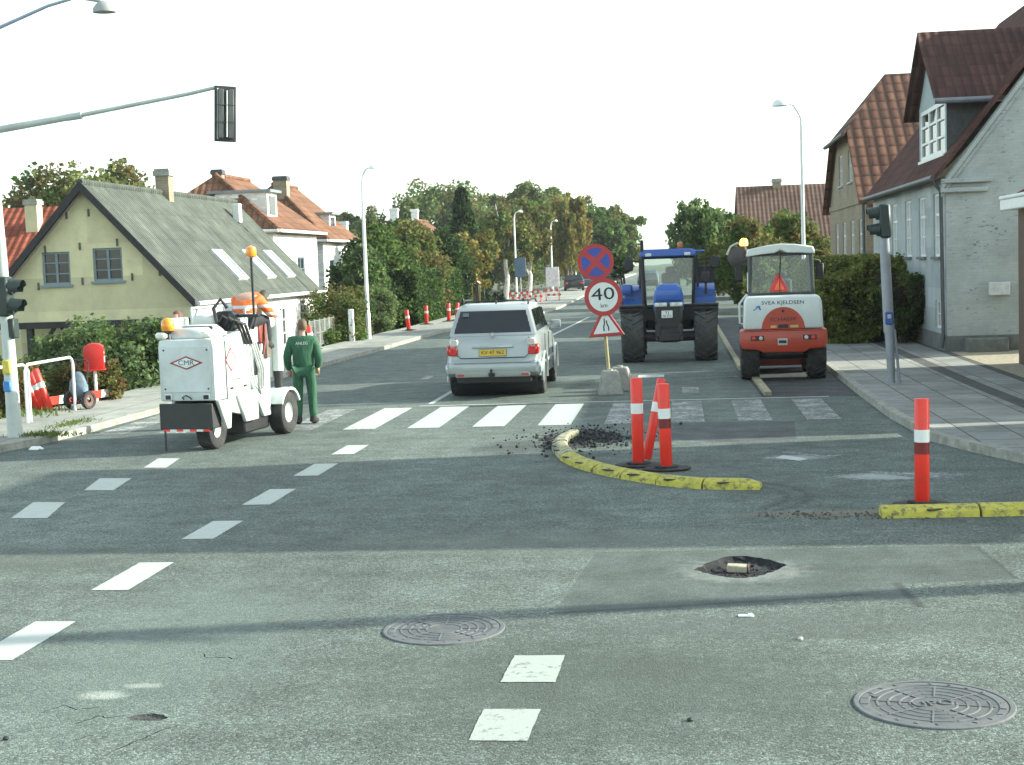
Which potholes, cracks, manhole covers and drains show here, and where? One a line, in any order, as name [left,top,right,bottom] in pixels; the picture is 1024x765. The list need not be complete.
pothole [694,556,786,578]
pothole [127,713,168,721]
crack [116,725,178,750]
crack [42,705,124,740]
manhole cover [383,613,505,646]
manhole cover [853,680,1017,730]
